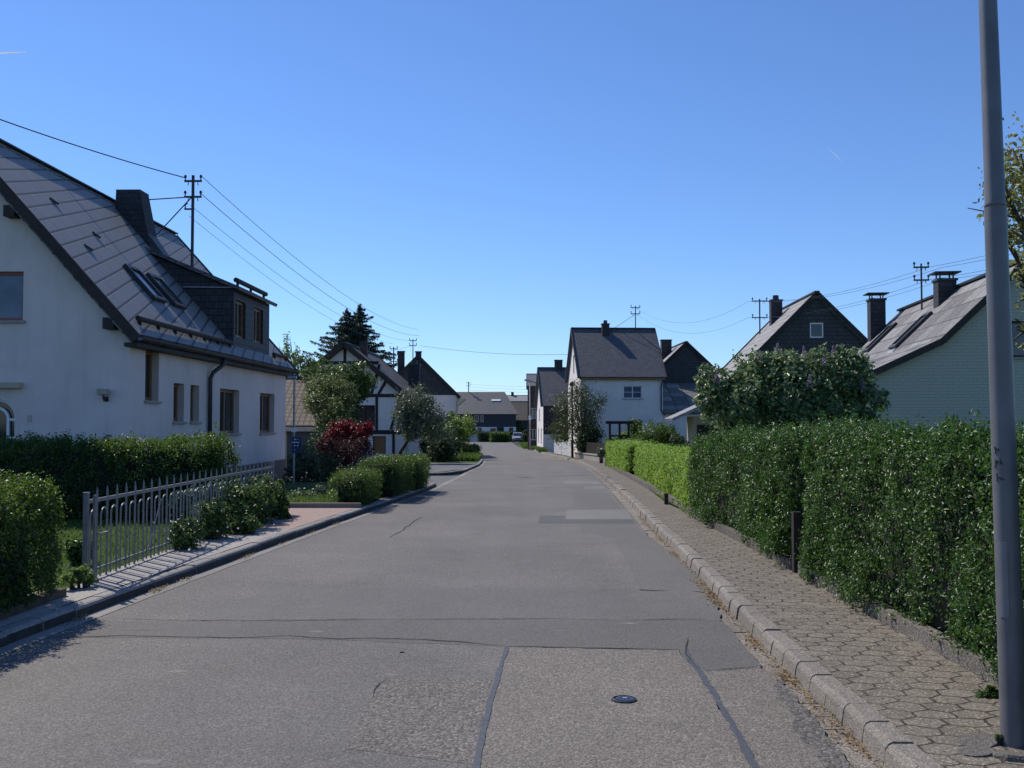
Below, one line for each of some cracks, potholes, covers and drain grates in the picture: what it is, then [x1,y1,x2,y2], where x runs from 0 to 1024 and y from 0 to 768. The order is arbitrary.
manhole cover [611,695,637,704]
